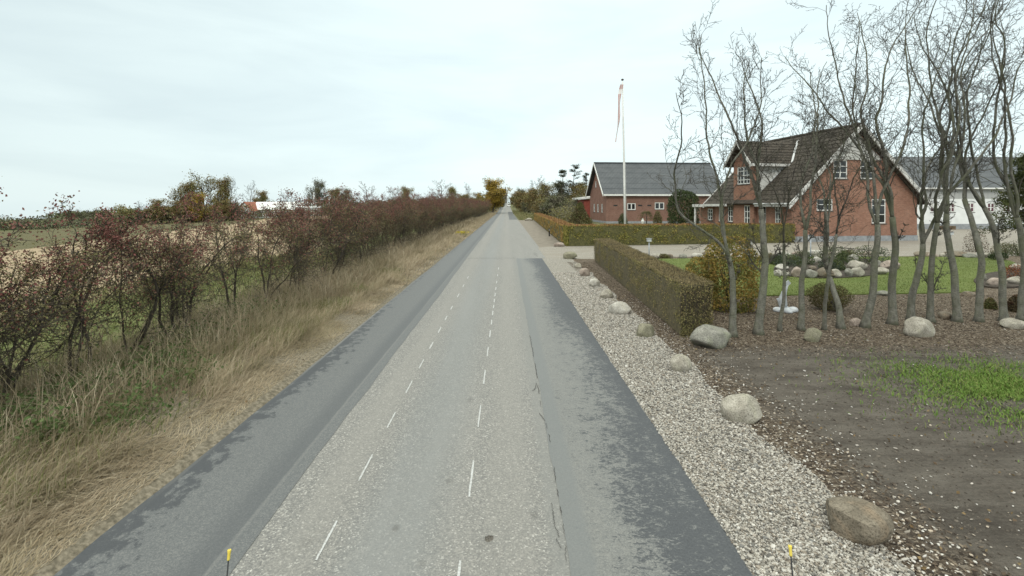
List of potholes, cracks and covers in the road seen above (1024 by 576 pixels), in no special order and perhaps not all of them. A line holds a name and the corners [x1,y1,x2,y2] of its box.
crack [530,337,566,557]
